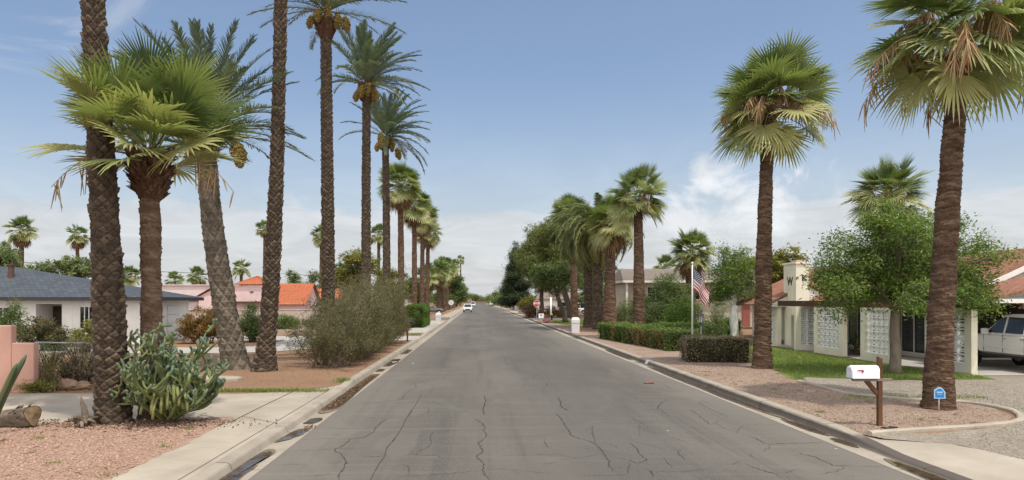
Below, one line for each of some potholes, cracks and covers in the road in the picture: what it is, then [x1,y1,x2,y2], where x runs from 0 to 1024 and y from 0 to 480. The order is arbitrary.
crack [289,385,445,477]
crack [367,397,546,477]
crack [691,402,882,478]
crack [522,377,702,478]
